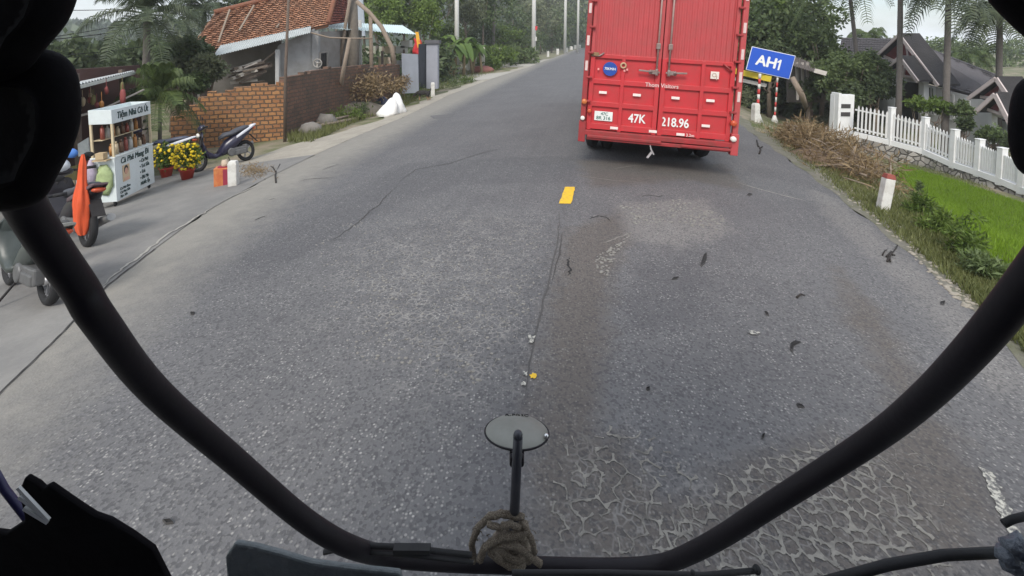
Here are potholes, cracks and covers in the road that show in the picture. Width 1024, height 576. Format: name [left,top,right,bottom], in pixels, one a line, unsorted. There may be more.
crack [551,411,958,576]
crack [330,188,395,242]
crack [351,217,572,399]
